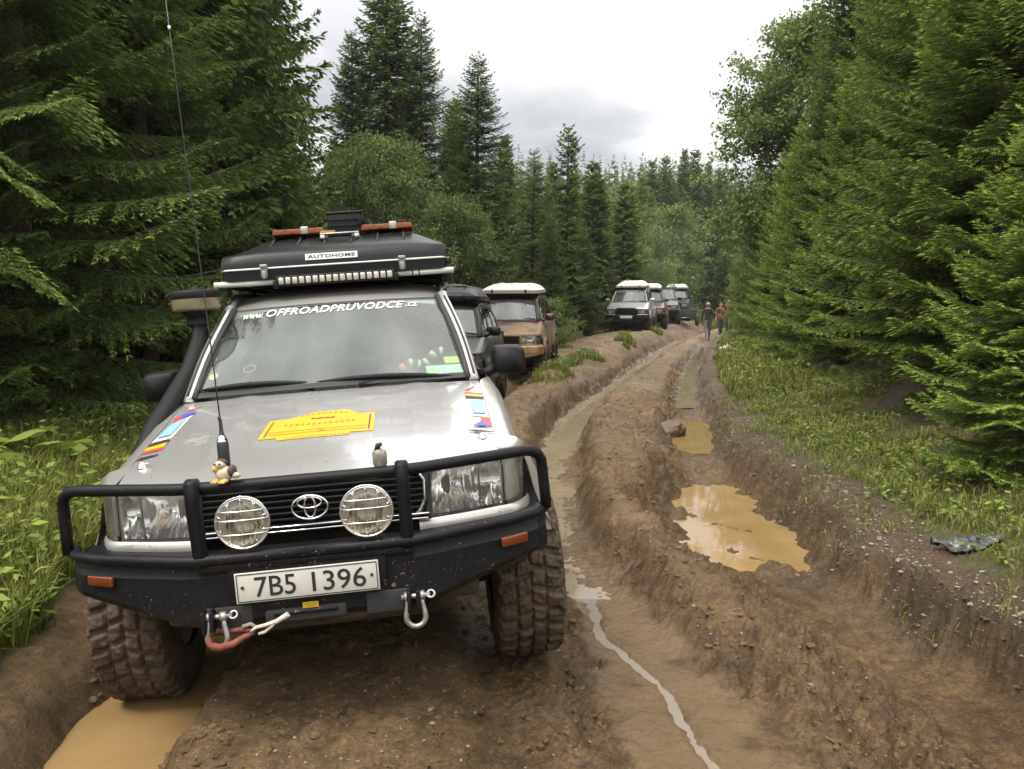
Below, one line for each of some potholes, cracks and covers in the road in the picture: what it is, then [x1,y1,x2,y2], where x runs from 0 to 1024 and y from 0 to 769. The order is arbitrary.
pothole [656,405,731,455]
pothole [620,450,854,577]
